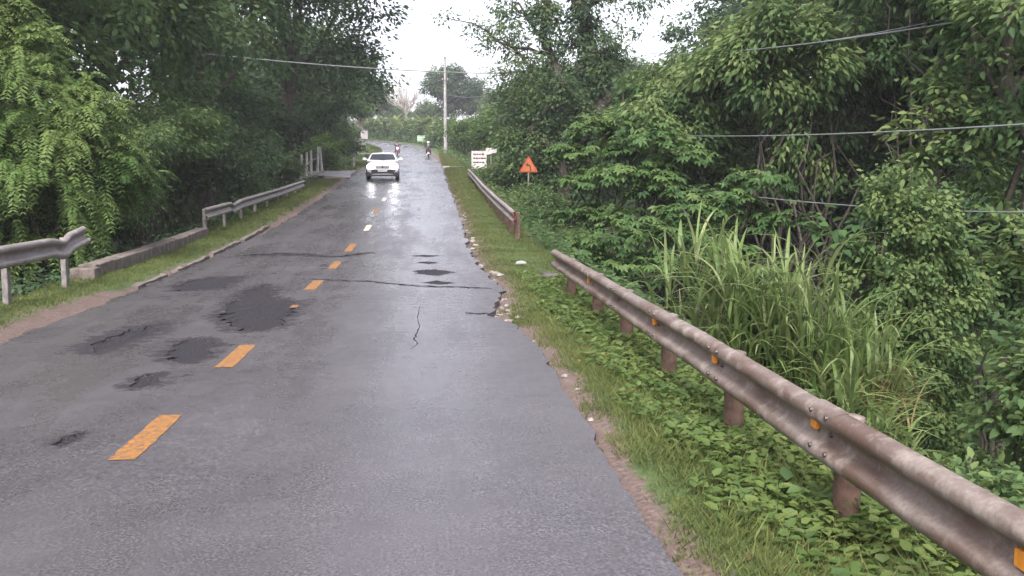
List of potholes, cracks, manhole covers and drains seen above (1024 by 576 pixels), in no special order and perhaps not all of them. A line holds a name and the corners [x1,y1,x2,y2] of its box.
pothole [166,338,215,363]
pothole [52,432,84,447]
pothole [129,374,160,389]
pothole [217,284,299,331]
pothole [90,323,165,352]
crack [320,279,491,289]
